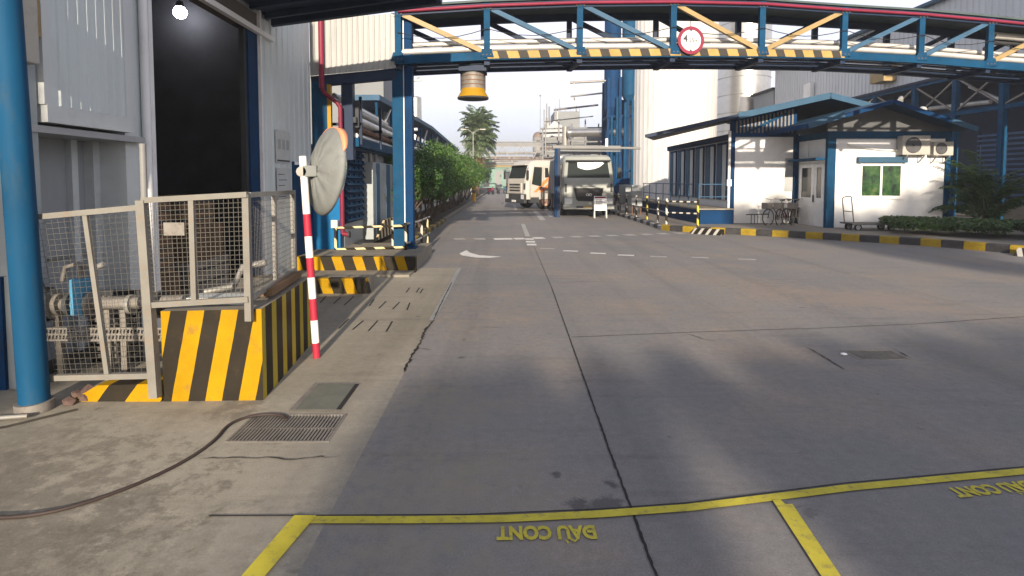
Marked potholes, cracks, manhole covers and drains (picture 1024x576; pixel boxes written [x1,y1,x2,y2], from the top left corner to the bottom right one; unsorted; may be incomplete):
manhole cover [289,383,360,411]
drain grate [225,414,348,442]
crack [403,282,452,372]
